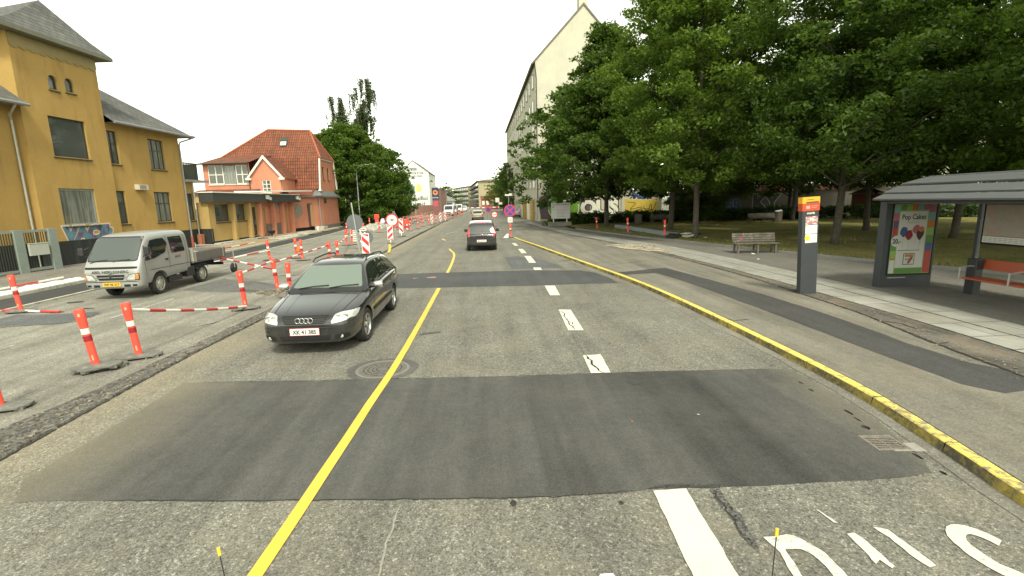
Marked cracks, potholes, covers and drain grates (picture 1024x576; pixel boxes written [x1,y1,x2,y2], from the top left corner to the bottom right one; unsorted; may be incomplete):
crack [713,490,741,531]
crack [589,238,1024,377]
manhole cover [347,358,419,381]
drain grate [858,435,927,452]
